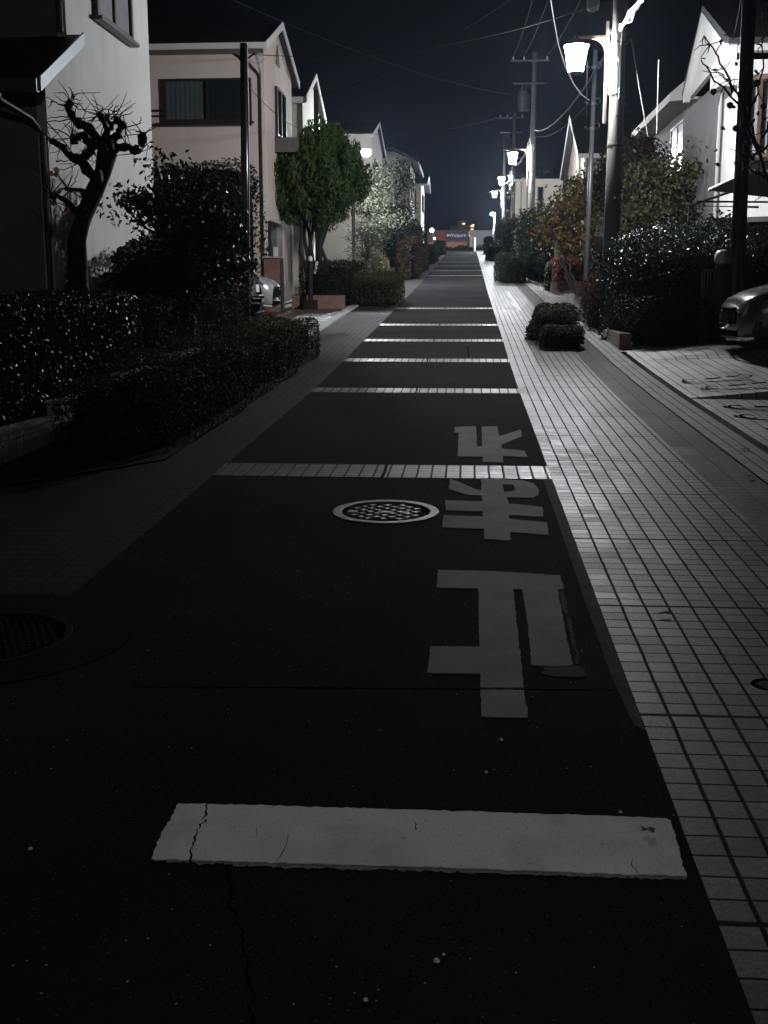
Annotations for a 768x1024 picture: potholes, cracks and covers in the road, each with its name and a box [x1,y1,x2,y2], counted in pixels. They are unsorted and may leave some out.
manhole cover [332,500,439,524]
crack [189,803,256,1024]
manhole cover [753,680,768,691]
manhole cover [0,611,73,662]
